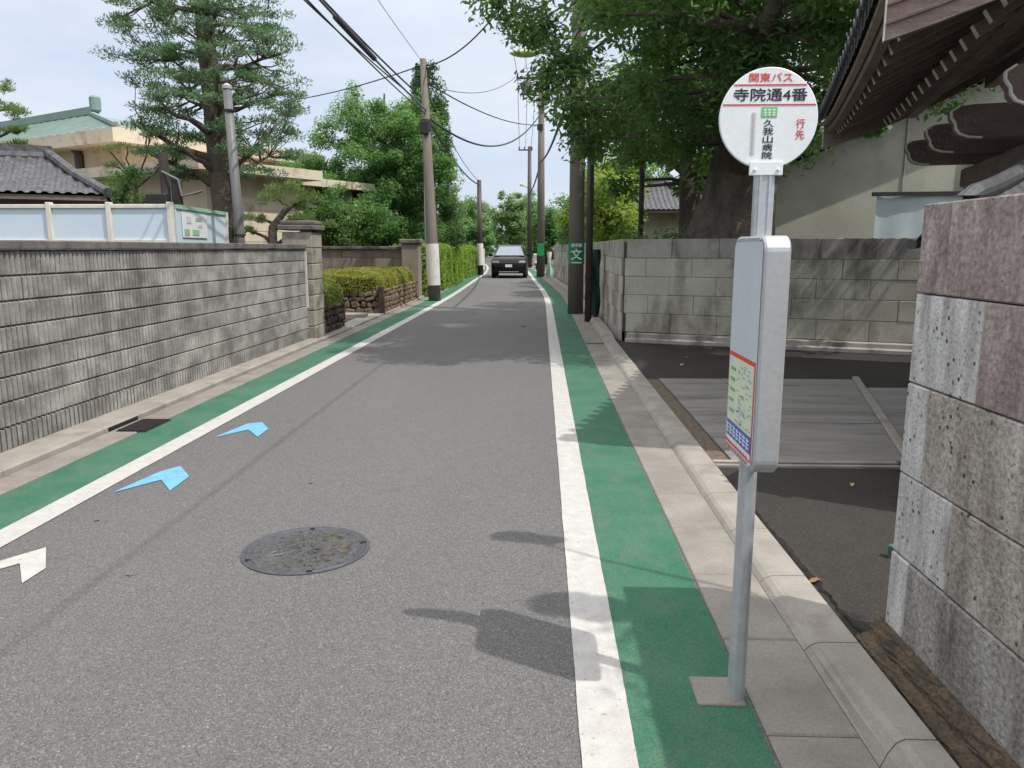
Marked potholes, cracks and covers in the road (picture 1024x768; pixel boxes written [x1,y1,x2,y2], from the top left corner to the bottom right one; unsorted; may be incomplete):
manhole cover [240,526,370,576]
drain grate [108,416,172,432]
